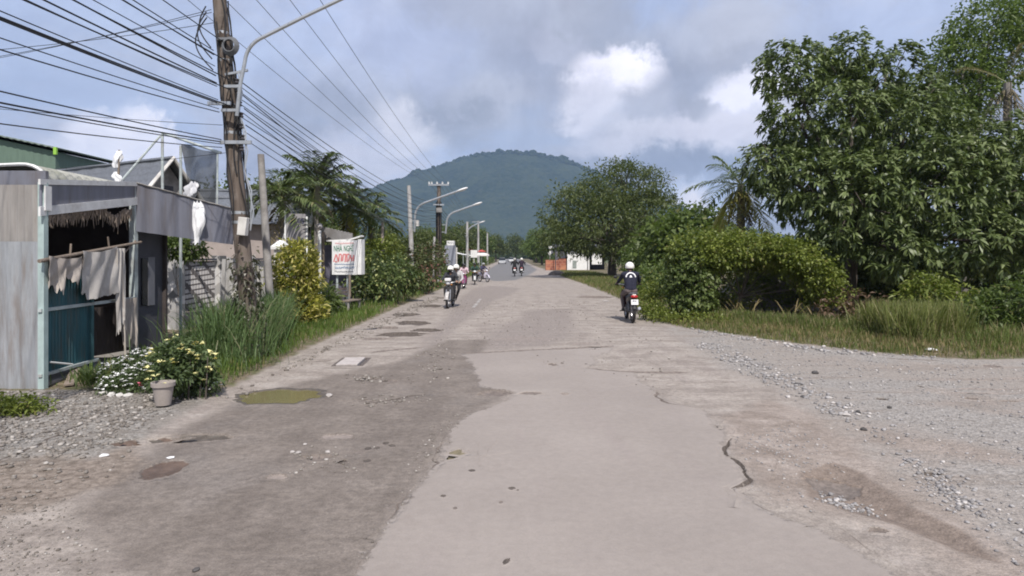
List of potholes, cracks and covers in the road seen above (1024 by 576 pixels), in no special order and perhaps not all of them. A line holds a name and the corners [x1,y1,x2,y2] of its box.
pothole [136,432,239,445]
pothole [795,473,870,504]
manhole cover [324,356,377,368]
pothole [101,435,197,448]
crack [355,345,910,575]
pothole [132,458,196,482]
